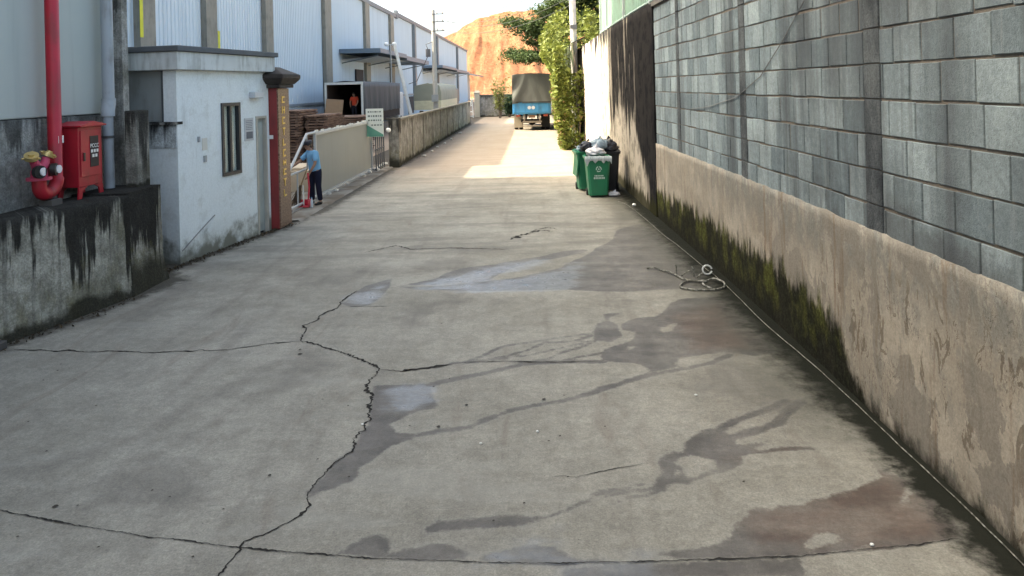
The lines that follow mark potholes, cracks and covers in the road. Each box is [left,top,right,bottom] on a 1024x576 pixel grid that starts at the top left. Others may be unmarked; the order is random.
crack [512,227,555,239]
crack [2,291,958,576]
